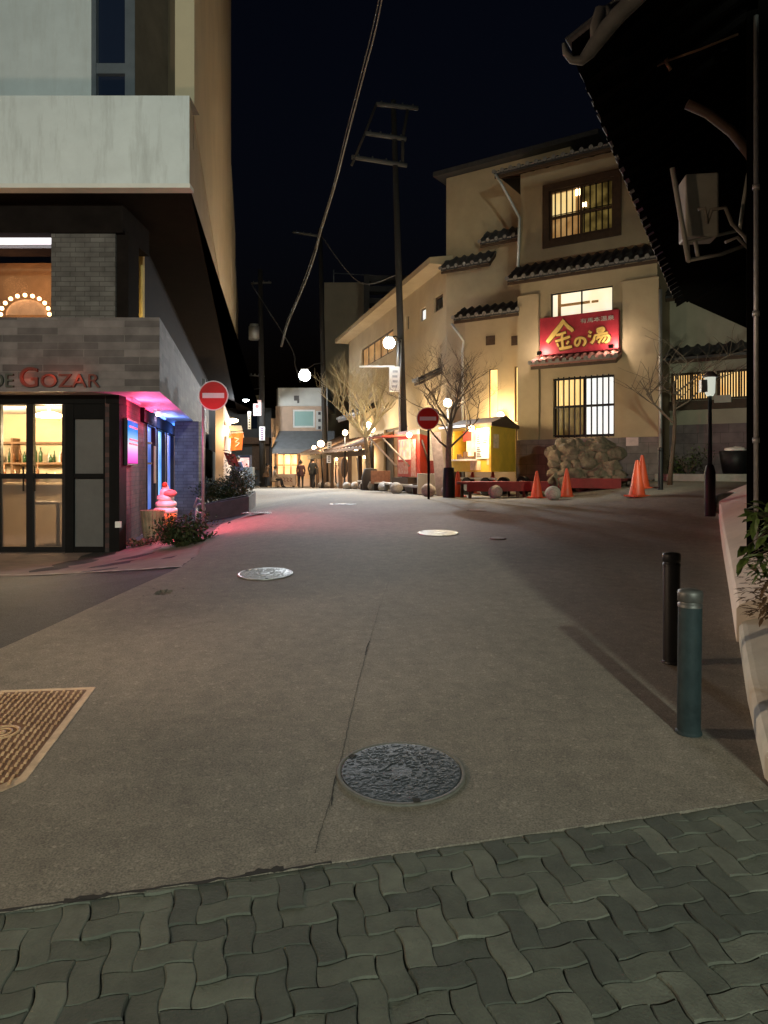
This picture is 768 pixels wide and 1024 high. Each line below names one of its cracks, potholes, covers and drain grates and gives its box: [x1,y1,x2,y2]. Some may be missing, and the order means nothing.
manhole cover [238,567,293,580]
manhole cover [336,742,466,807]
